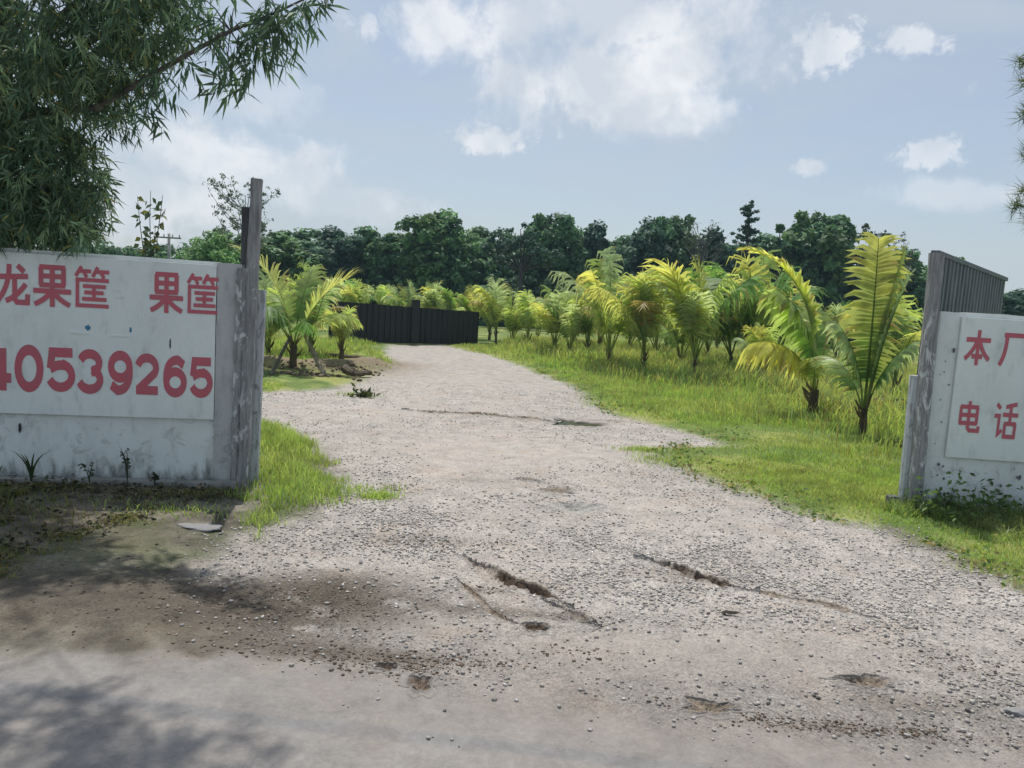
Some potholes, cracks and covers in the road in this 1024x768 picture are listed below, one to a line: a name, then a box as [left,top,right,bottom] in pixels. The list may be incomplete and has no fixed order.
pothole [399,672,440,699]
crack [448,552,609,632]
crack [398,408,561,424]
crack [627,554,880,625]
pothole [537,417,623,429]
pothole [664,694,758,721]
pothole [816,672,909,695]
pothole [514,621,560,637]
